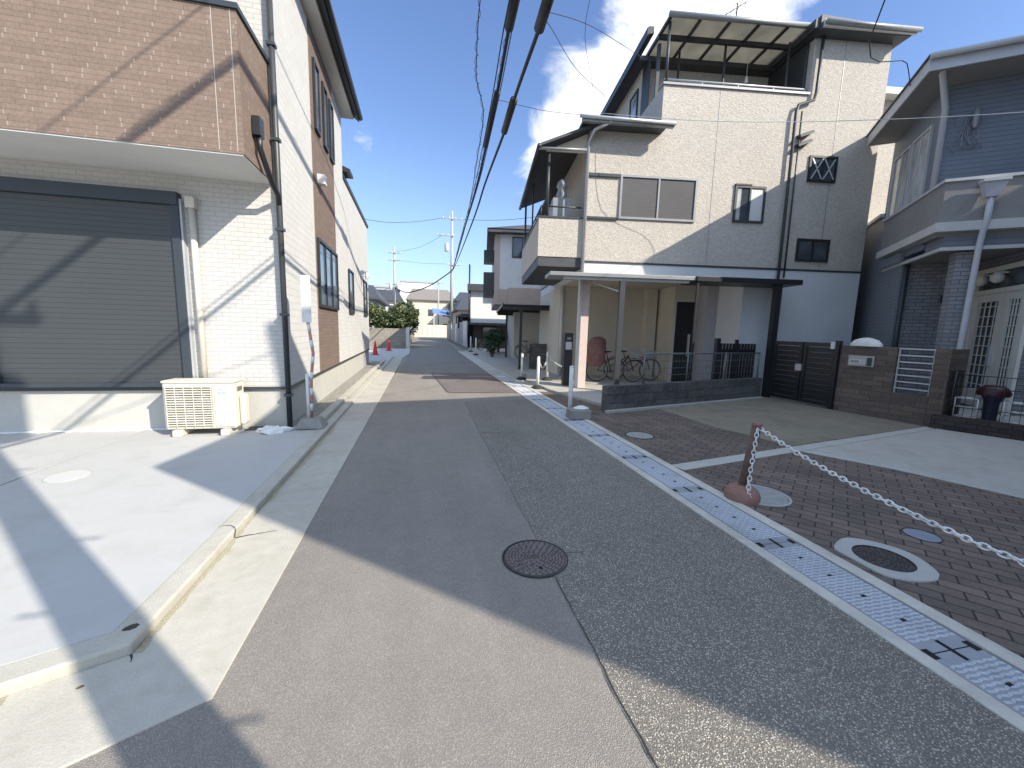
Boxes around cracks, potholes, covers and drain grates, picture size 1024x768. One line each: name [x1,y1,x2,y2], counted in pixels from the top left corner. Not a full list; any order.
manhole cover [750,484,792,507]
manhole cover [502,540,568,579]
manhole cover [625,431,655,439]
manhole cover [901,527,944,543]
manhole cover [42,470,93,483]
manhole cover [834,538,939,583]
